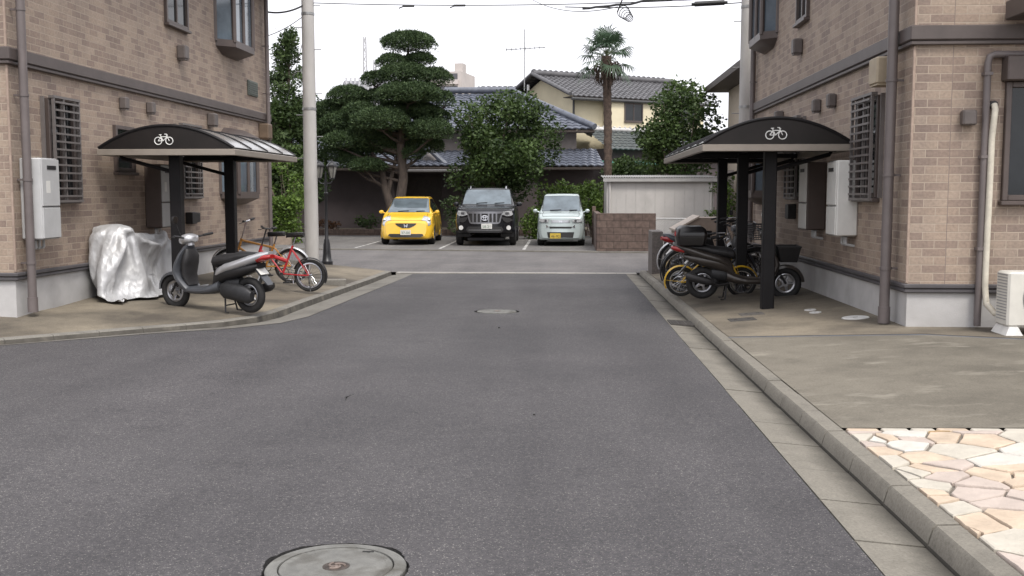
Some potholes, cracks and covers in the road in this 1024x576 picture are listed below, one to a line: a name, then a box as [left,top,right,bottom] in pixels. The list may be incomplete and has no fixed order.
manhole cover [261,543,410,576]
